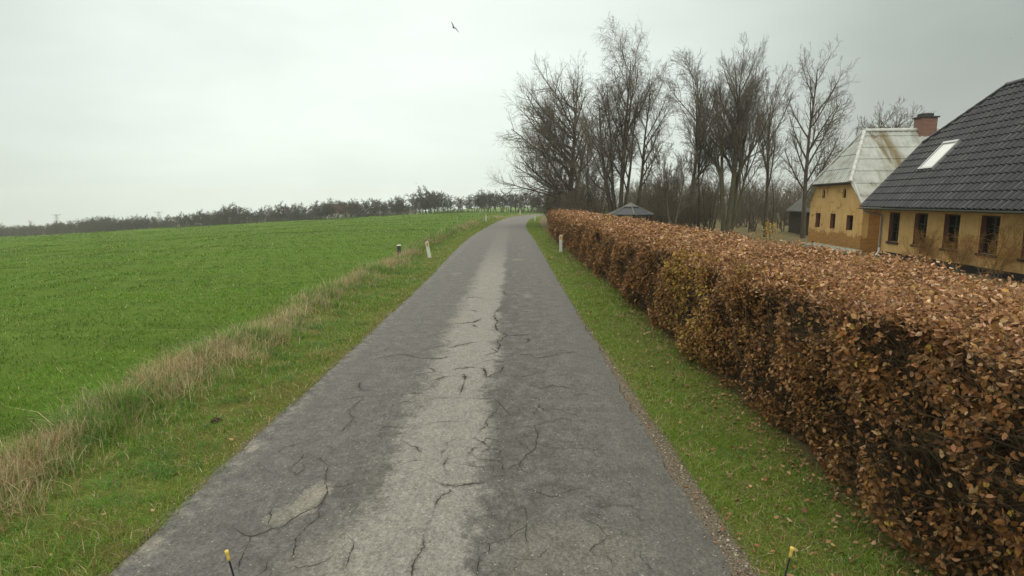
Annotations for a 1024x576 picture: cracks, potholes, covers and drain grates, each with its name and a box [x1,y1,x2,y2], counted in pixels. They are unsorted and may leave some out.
crack [380,292,577,505]
crack [237,443,354,576]
crack [476,488,577,576]
crack [589,505,656,573]
